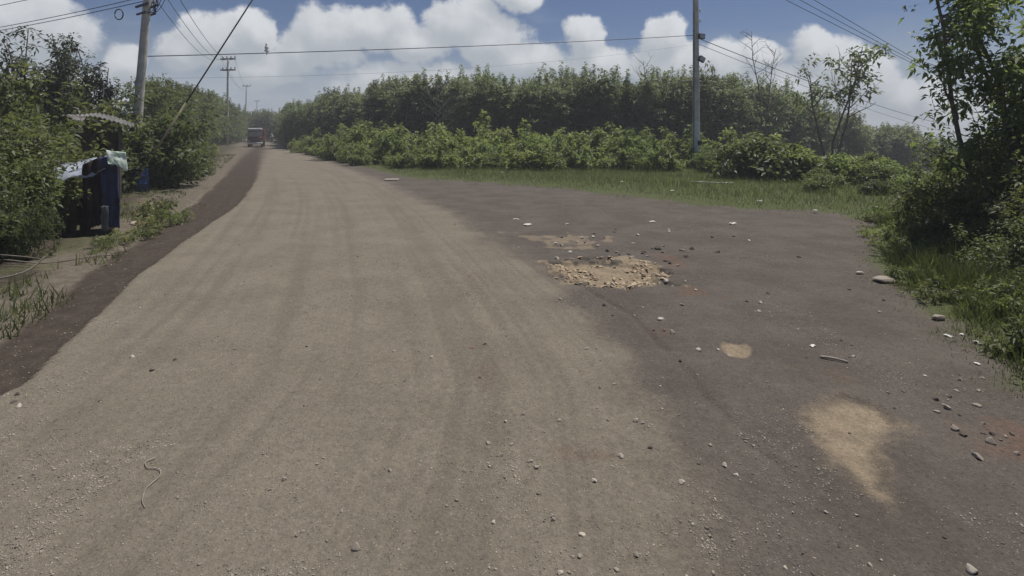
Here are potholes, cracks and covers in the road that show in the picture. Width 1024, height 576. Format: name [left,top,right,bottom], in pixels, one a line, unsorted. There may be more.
pothole [542,256,681,290]
